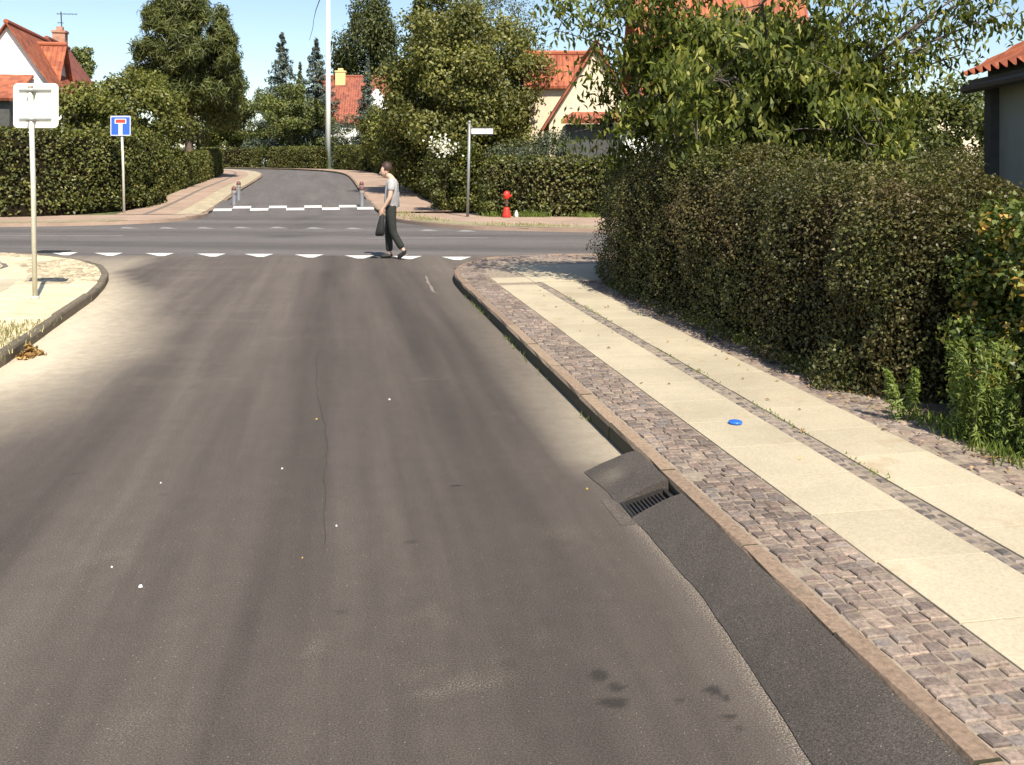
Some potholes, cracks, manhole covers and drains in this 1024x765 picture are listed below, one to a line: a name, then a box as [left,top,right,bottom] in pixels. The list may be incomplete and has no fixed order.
crack [316,350,328,556]
drain grate [620,488,673,518]
